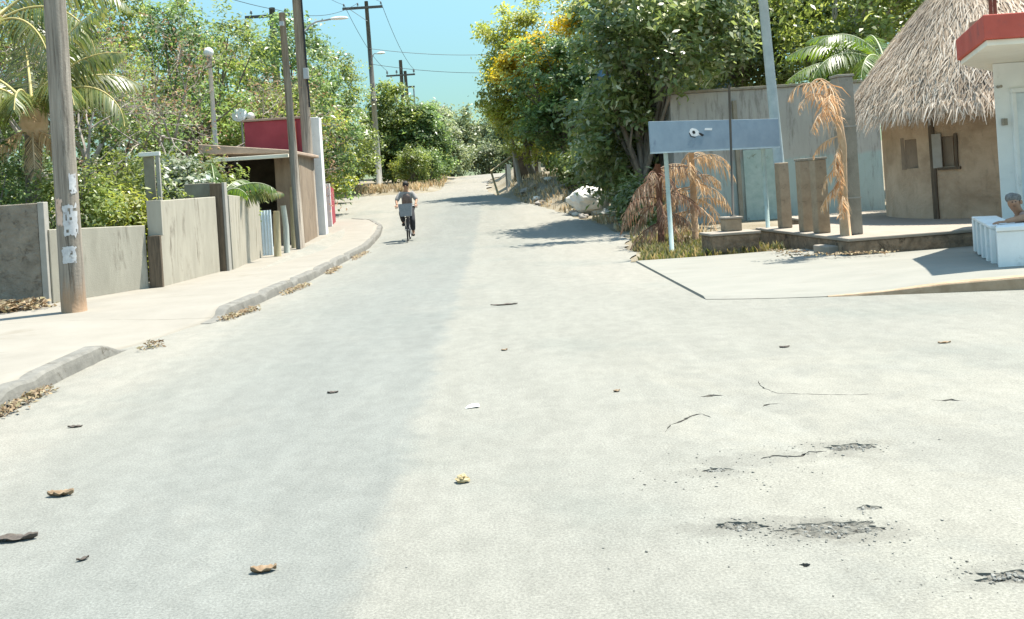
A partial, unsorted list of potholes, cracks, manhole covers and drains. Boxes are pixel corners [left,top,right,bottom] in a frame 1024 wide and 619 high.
pothole [715,521,770,532]
crack [761,451,826,459]
pothole [823,443,876,451]
crack [758,381,865,406]
pothole [974,569,1024,583]
pothole [773,521,887,539]
